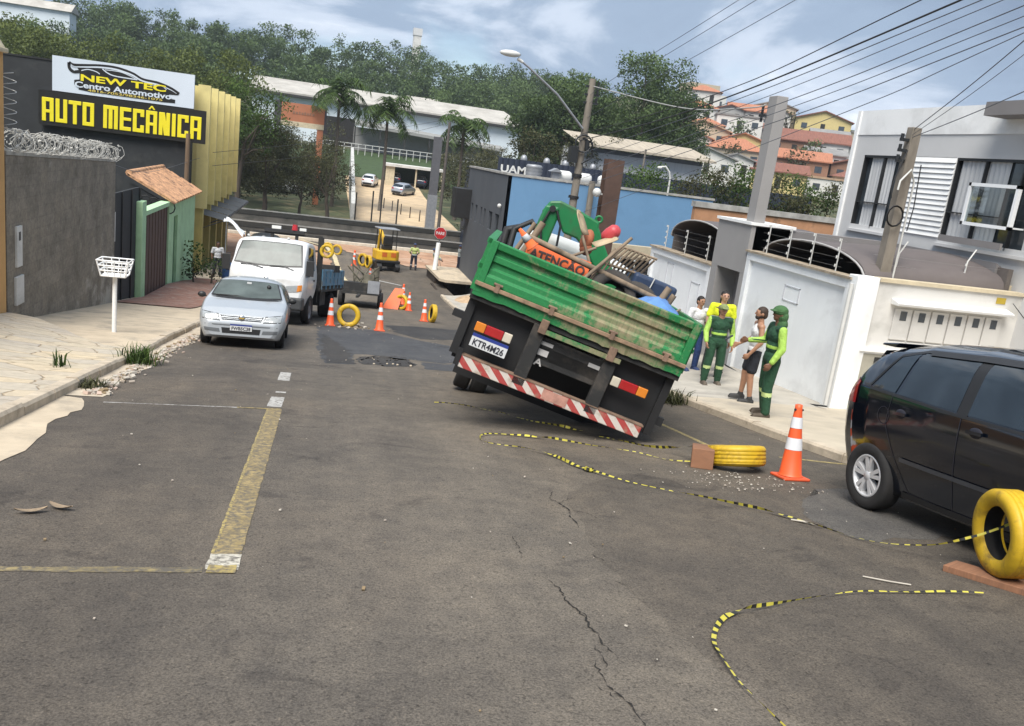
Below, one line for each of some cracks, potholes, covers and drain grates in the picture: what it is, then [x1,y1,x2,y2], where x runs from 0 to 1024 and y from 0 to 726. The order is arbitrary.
crack [551,581,646,726]
pothole [356,355,417,367]
